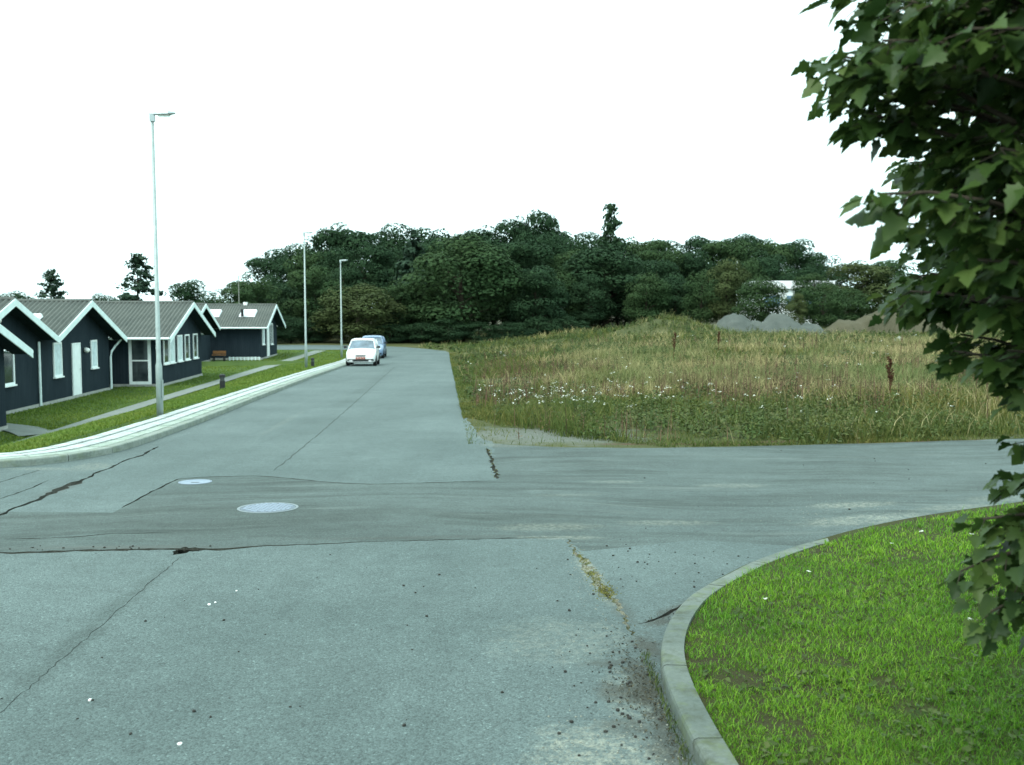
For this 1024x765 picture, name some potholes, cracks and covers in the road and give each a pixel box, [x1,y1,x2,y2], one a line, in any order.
manhole cover [237,502,298,513]
crack [485,449,500,479]
crack [566,539,682,637]
crack [0,532,511,713]
crack [0,447,157,516]
